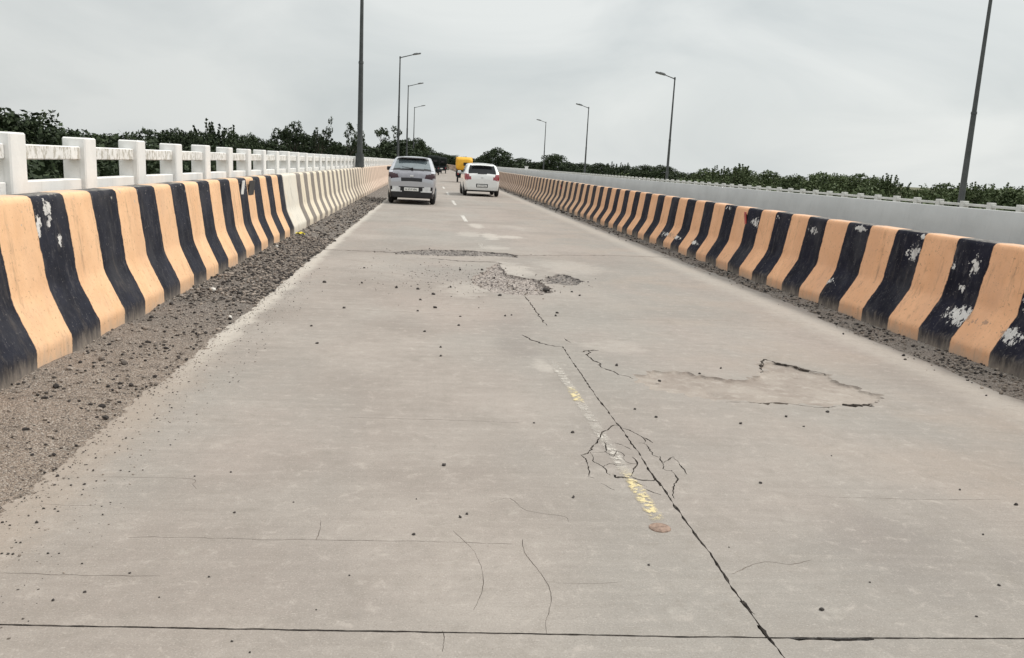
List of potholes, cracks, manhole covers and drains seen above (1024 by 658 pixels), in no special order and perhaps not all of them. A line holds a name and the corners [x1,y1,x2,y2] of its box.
pothole [470,262,551,296]
crack [130,522,615,634]
pothole [538,274,584,285]
crack [523,297,810,658]
